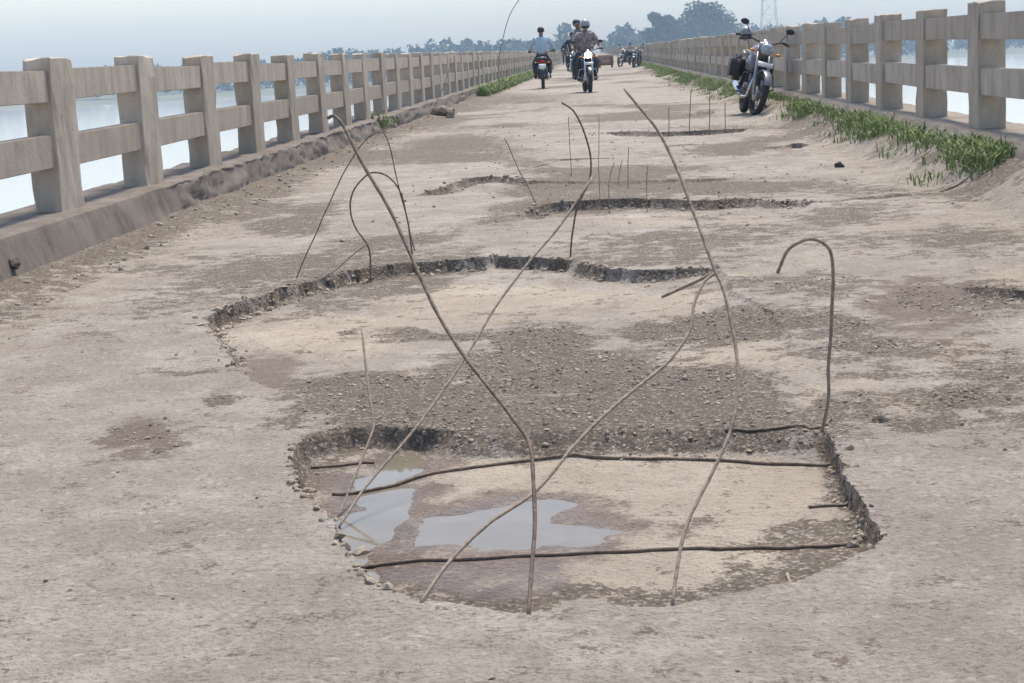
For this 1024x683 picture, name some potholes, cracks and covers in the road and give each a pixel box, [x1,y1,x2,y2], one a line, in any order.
pothole [414,174,820,197]
pothole [282,423,888,613]
pothole [601,127,754,137]
pothole [193,253,804,420]
pothole [962,285,1024,313]
pothole [510,197,822,222]
